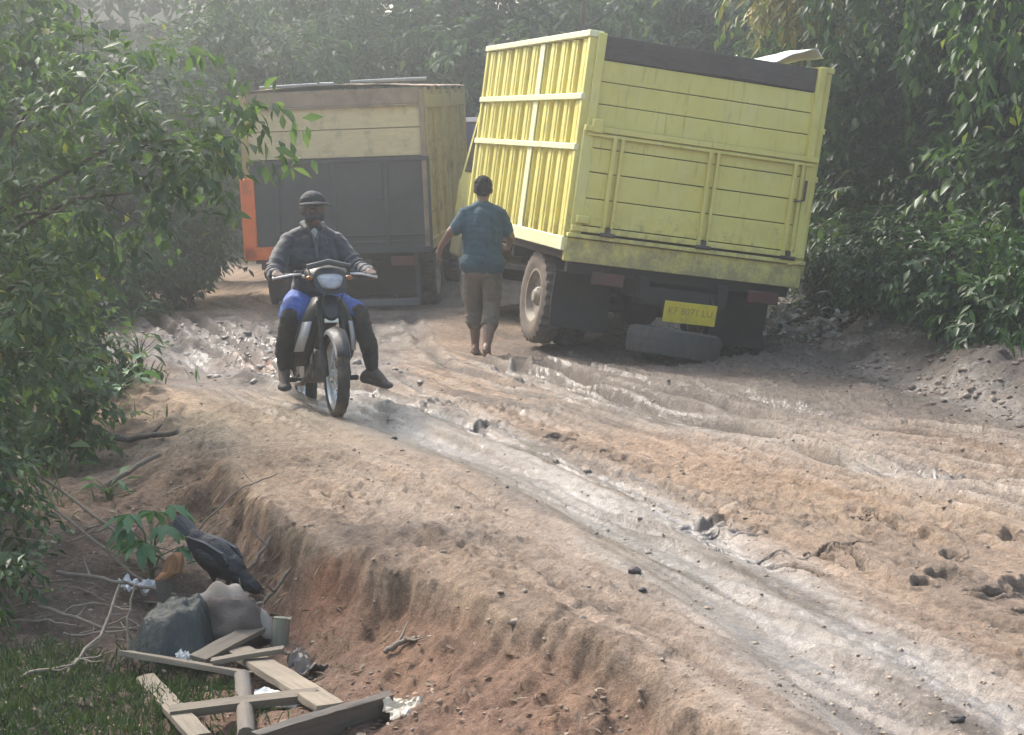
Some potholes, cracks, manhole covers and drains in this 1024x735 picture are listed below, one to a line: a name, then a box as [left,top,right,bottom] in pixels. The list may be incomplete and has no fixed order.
pothole [904,545,990,592]
